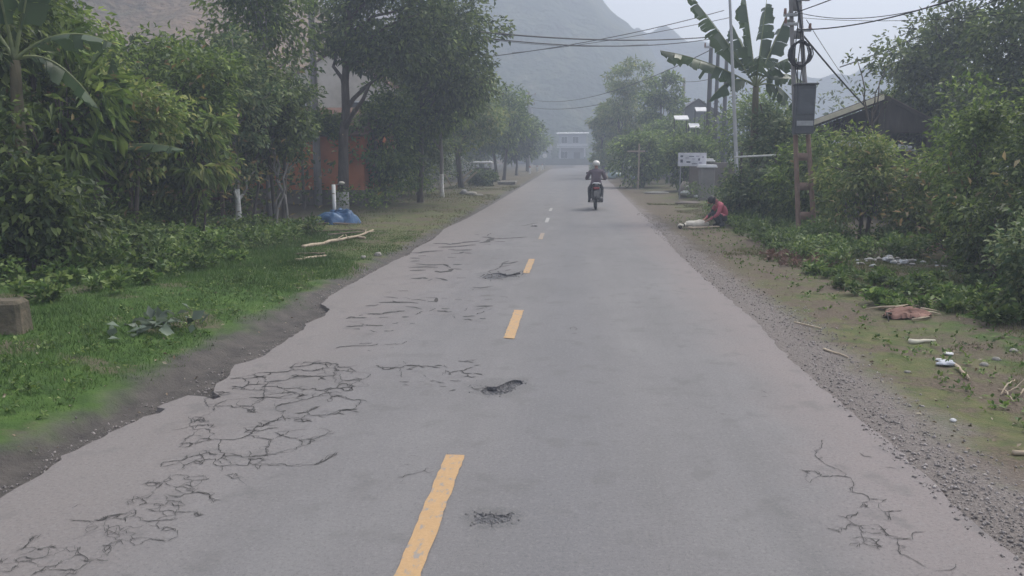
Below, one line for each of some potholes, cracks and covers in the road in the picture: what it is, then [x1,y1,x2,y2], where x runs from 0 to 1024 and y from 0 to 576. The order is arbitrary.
pothole [465,511,520,527]
pothole [480,271,524,281]
crack [147,261,518,487]
pothole [469,379,530,397]
crack [0,482,217,576]
crack [799,440,924,566]
crack [410,223,534,281]
